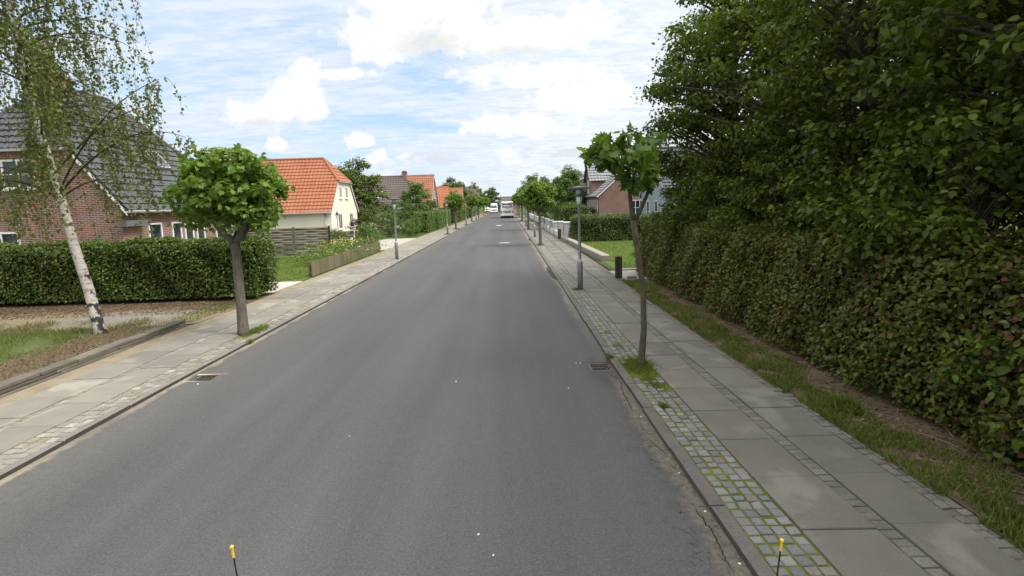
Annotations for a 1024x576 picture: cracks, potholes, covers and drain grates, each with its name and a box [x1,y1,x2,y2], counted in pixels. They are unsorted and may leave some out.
drain grate [191,374,221,382]
crack [611,375,665,463]
drain grate [587,363,612,371]
crack [679,503,732,573]
